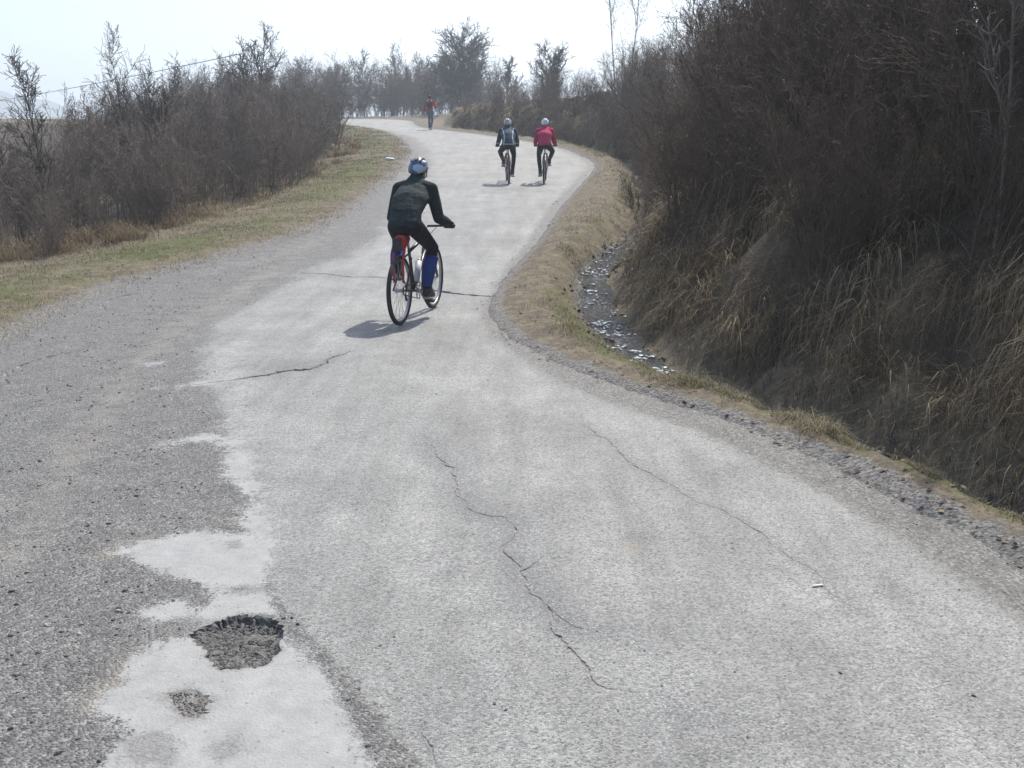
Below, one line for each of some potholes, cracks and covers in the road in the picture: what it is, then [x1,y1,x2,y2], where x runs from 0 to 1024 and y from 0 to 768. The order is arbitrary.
pothole [189,614,284,670]
crack [195,350,354,385]
crack [309,273,492,297]
crack [425,437,613,690]
crack [579,423,865,616]
pothole [165,689,214,720]
